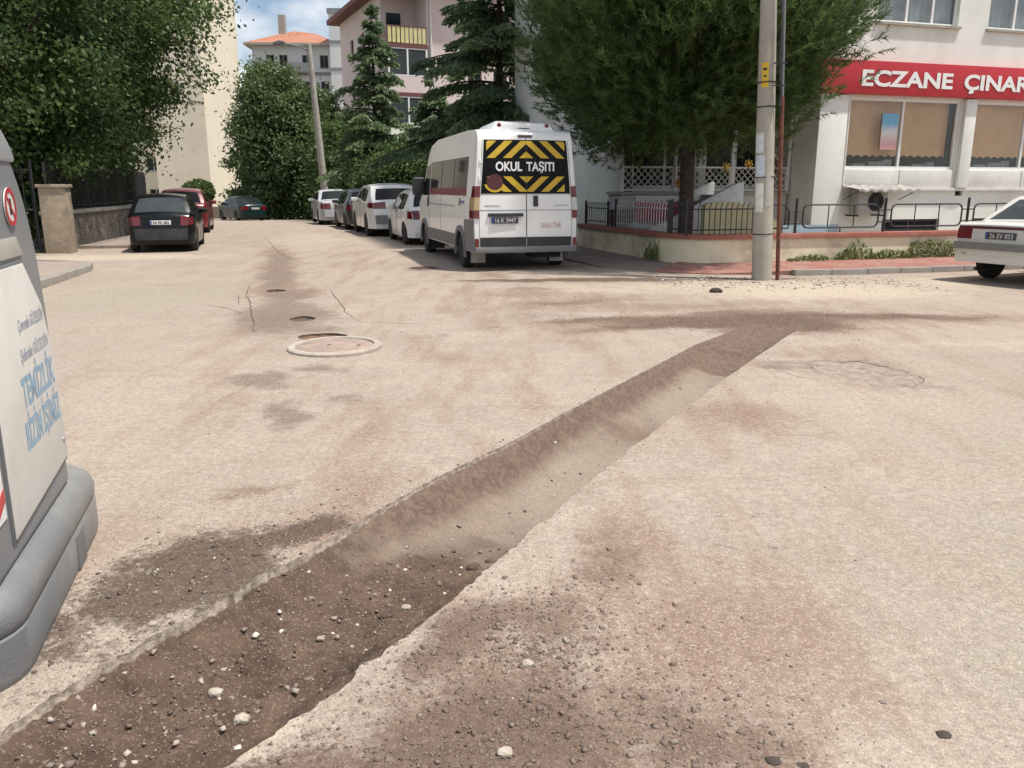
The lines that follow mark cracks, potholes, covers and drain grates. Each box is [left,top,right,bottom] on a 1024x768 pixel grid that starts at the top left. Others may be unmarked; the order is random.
crack [210,285,254,333]
manhole cover [287,336,382,358]
